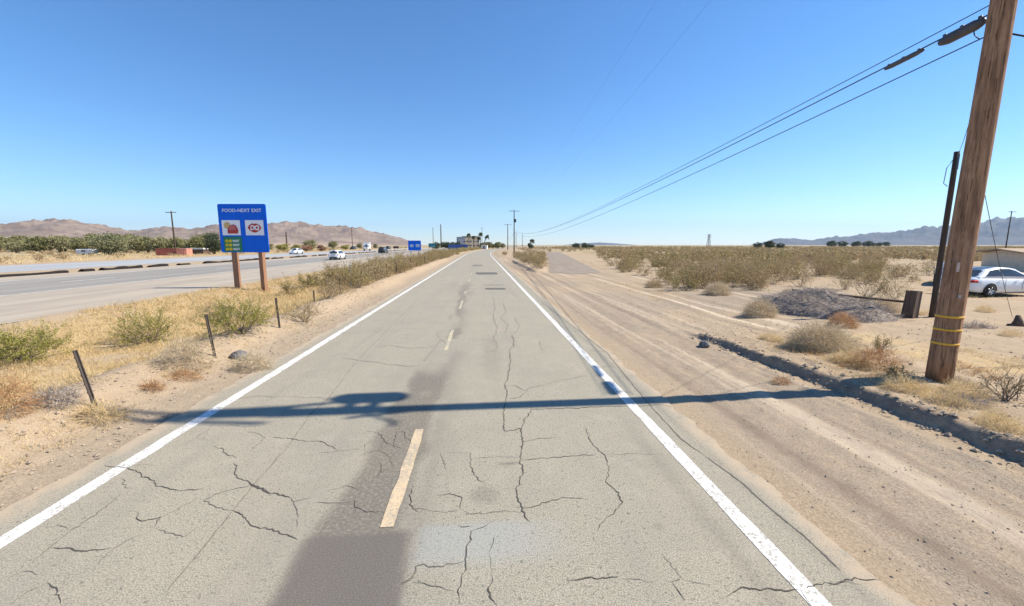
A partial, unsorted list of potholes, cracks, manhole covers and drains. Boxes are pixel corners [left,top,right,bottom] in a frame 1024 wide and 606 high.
crack [401,303,585,605]
crack [7,421,411,603]
crack [662,553,878,603]
crack [586,429,663,528]
